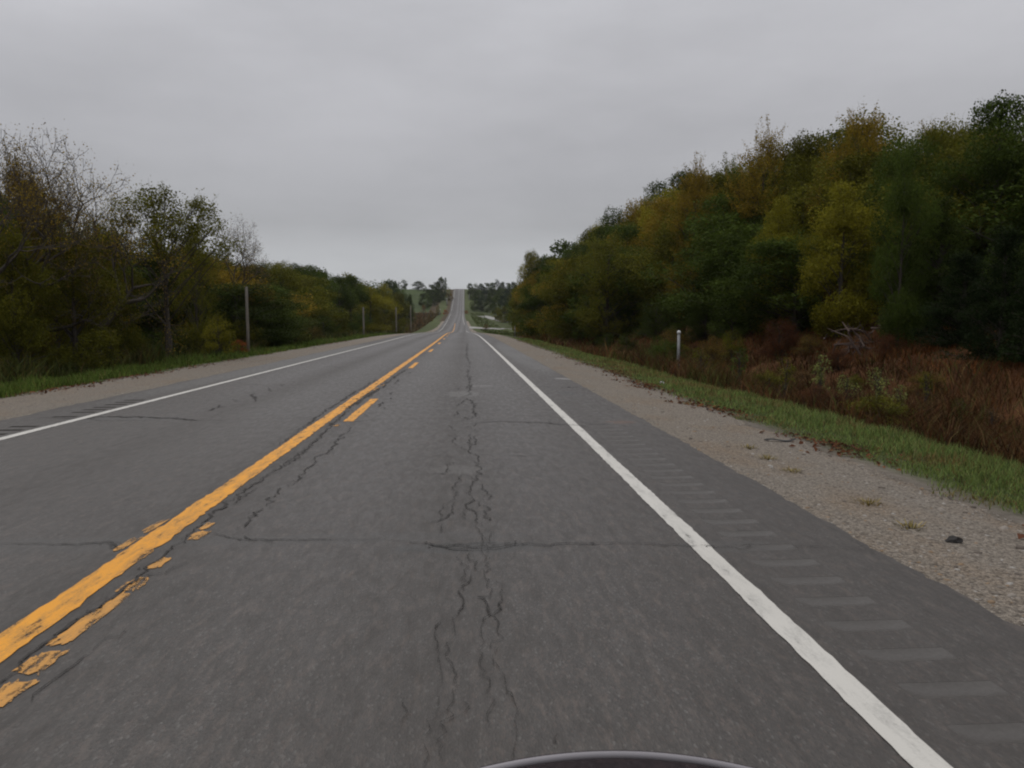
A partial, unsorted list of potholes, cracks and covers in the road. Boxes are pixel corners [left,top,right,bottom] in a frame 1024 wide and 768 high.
crack [42,344,863,765]
